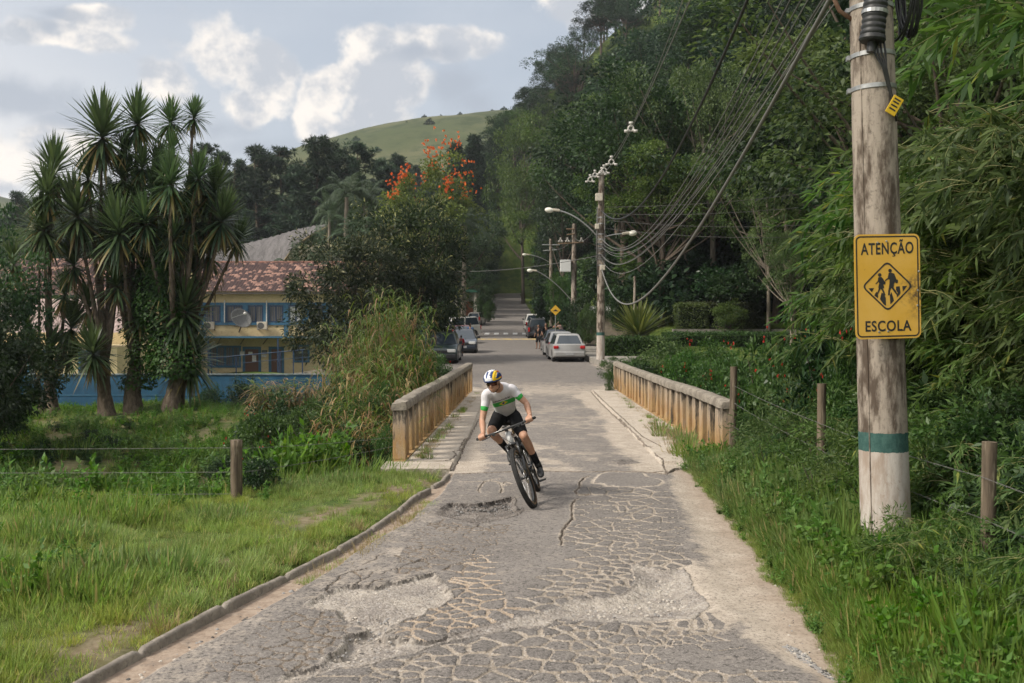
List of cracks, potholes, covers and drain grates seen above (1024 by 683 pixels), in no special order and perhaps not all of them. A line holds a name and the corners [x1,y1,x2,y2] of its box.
pothole [435,497,524,525]
crack [205,390,798,683]
